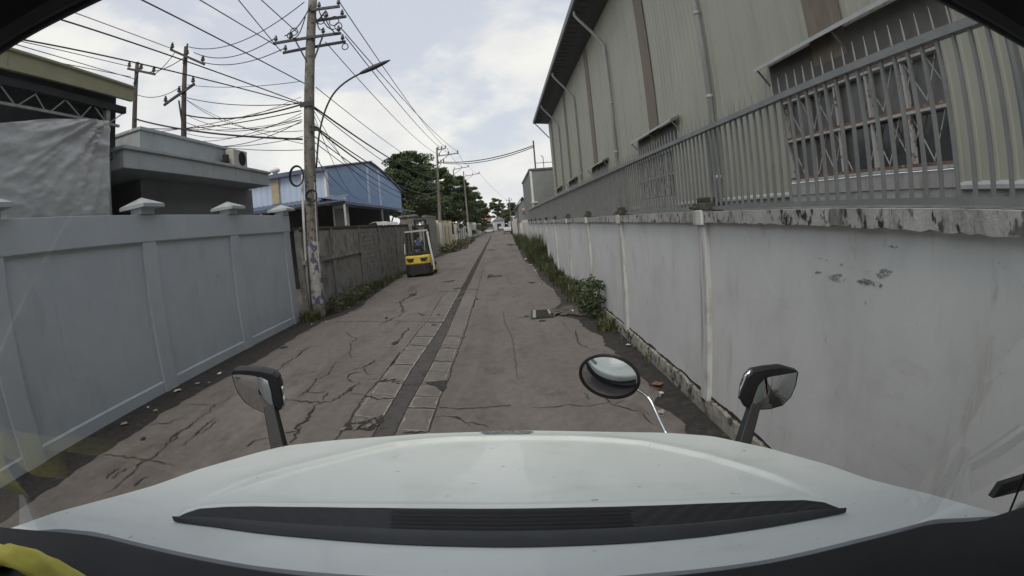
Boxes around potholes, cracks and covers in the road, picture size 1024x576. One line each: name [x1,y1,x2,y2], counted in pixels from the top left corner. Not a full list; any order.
crack [104,400,225,493]
crack [541,393,652,423]
crack [277,290,508,443]
